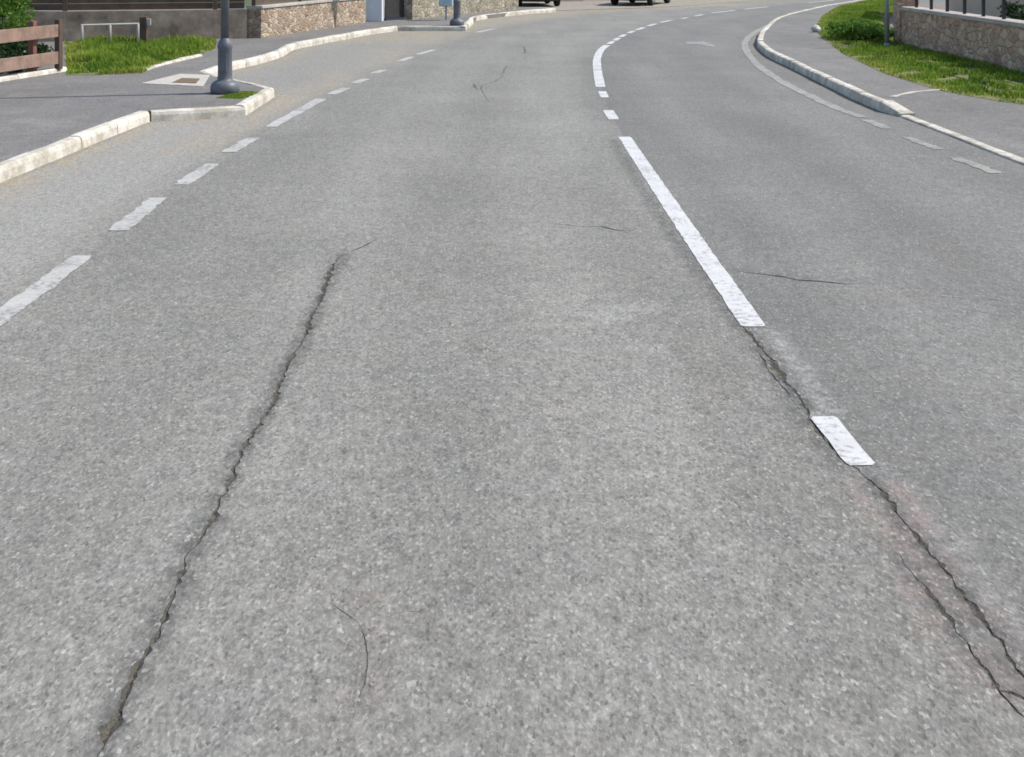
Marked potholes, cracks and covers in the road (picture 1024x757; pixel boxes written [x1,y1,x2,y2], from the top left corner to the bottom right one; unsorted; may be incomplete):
manhole cover [141,74,210,87]
crack [738,271,988,300]
crack [97,238,415,756]
crack [472,47,526,102]
crack [743,327,1024,717]
